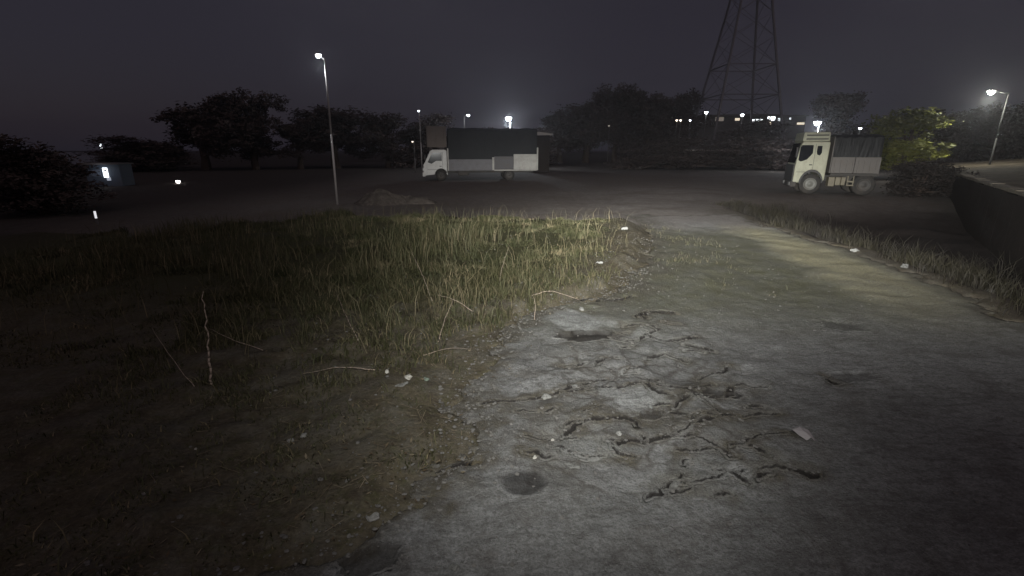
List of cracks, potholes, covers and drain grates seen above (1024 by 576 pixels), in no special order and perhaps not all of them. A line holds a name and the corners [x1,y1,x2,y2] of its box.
pothole [492,464,555,499]
crack [480,295,823,502]
pothole [811,369,891,384]
pothole [550,329,628,344]
pothole [800,317,875,333]
